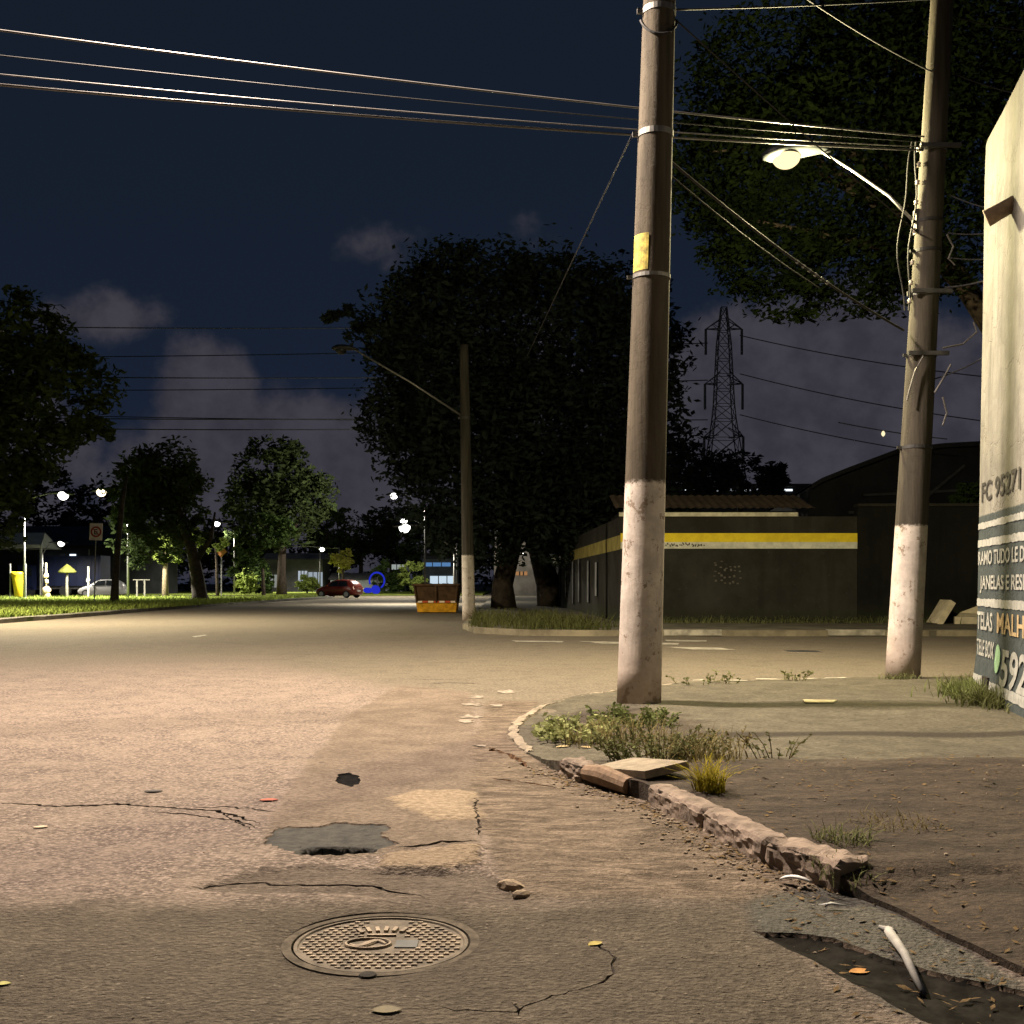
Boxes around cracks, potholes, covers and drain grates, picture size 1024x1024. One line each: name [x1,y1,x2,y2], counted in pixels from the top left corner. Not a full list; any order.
manhole cover [281,913,479,979]
crack [202,882,425,898]
crack [399,798,482,847]
pothole [264,822,400,856]
crack [2,803,275,829]
pothole [335,773,361,787]
crack [488,747,553,787]
crack [409,935,617,1016]
